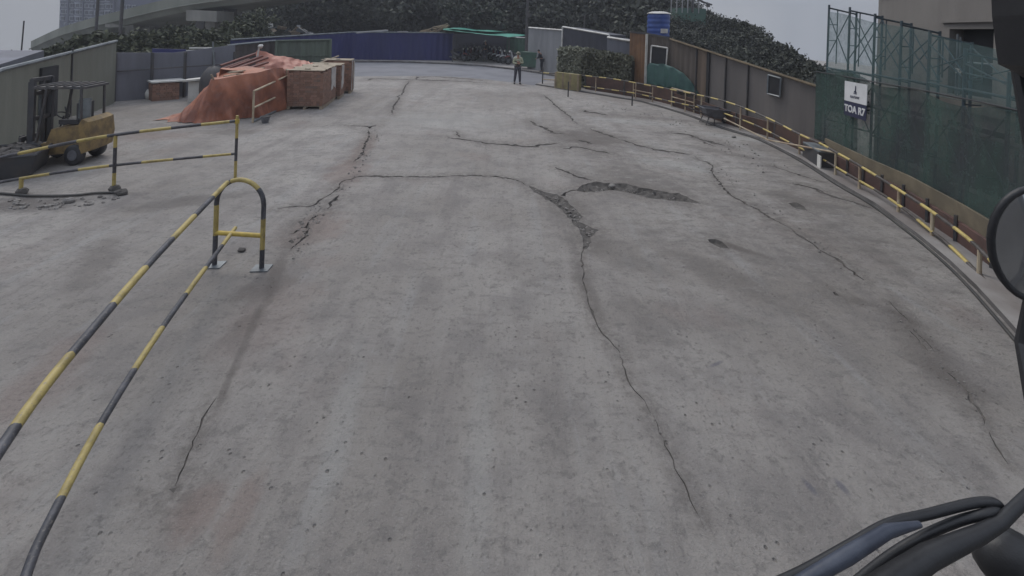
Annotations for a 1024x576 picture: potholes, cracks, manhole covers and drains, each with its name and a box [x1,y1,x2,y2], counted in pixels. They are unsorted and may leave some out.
crack [890,302,932,351]
crack [272,97,864,528]
crack [947,372,1007,462]
pothole [577,181,701,204]
crack [369,77,482,113]
crack [169,397,217,493]
